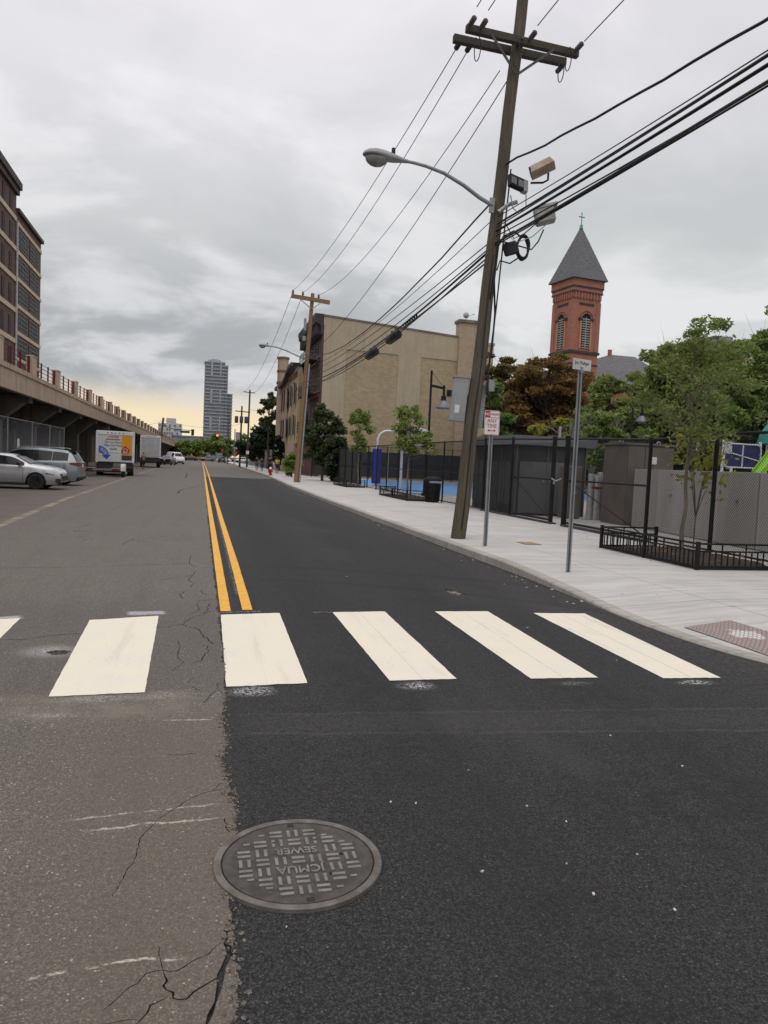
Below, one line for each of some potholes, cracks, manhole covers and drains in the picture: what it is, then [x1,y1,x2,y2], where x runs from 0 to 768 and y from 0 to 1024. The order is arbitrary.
crack [102,930,235,1024]
crack [157,599,222,702]
crack [112,782,230,897]
manhole cover [213,819,382,914]
